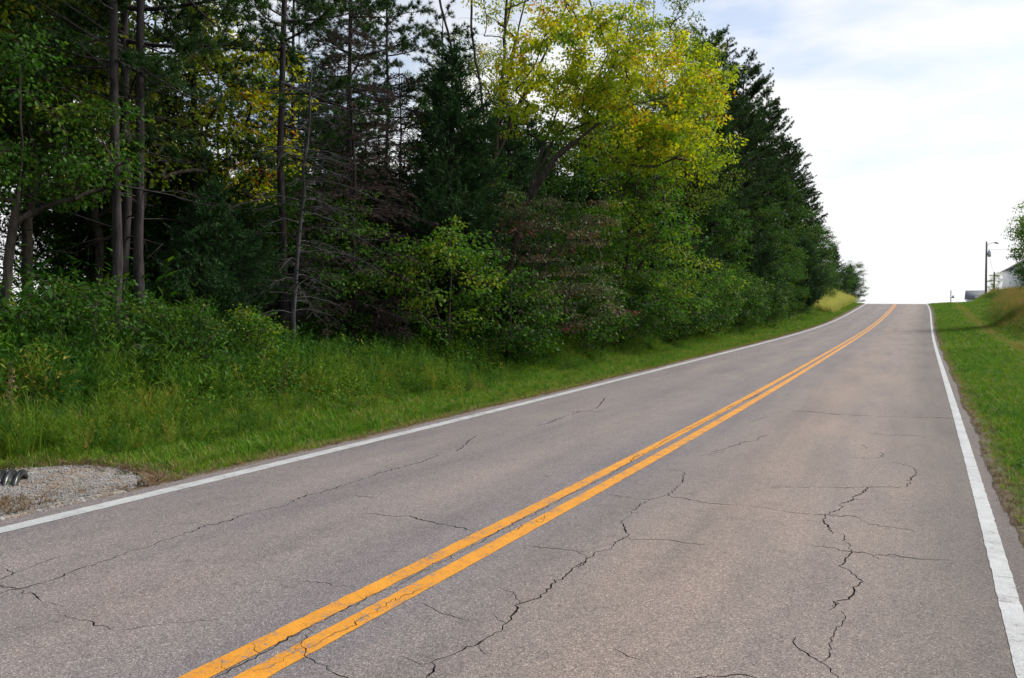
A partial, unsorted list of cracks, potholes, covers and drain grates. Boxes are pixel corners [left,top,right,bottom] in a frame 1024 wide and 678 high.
crack [0,453,438,630]
crack [403,470,775,678]
crack [355,495,472,531]
crack [779,444,950,678]
